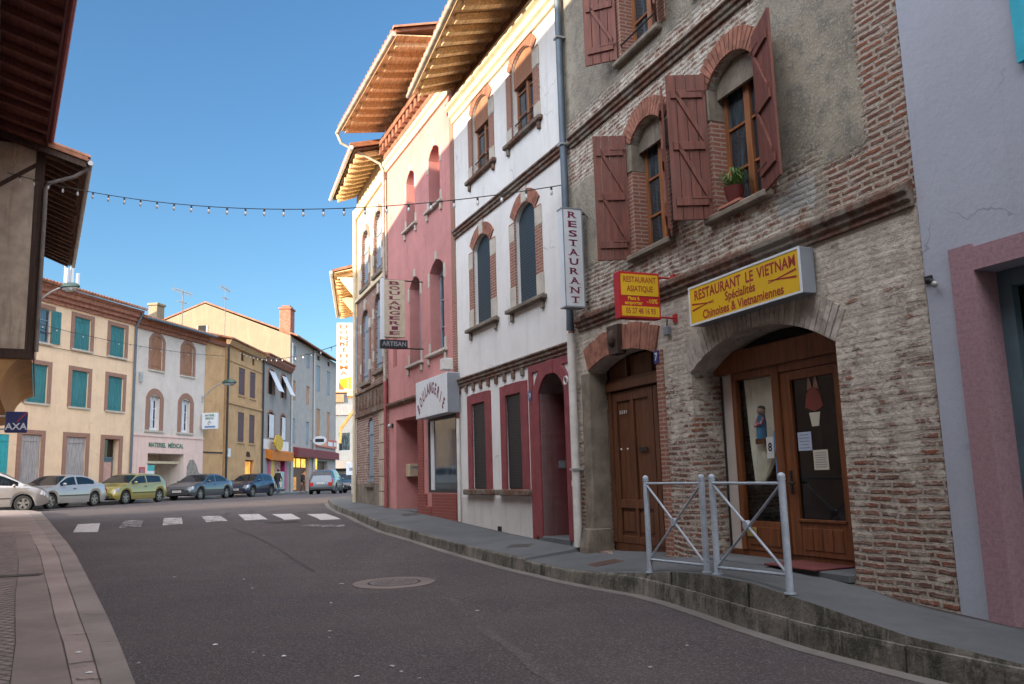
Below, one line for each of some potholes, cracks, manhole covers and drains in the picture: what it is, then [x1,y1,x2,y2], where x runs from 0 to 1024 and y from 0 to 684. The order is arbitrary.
manhole cover [352,577,435,589]
